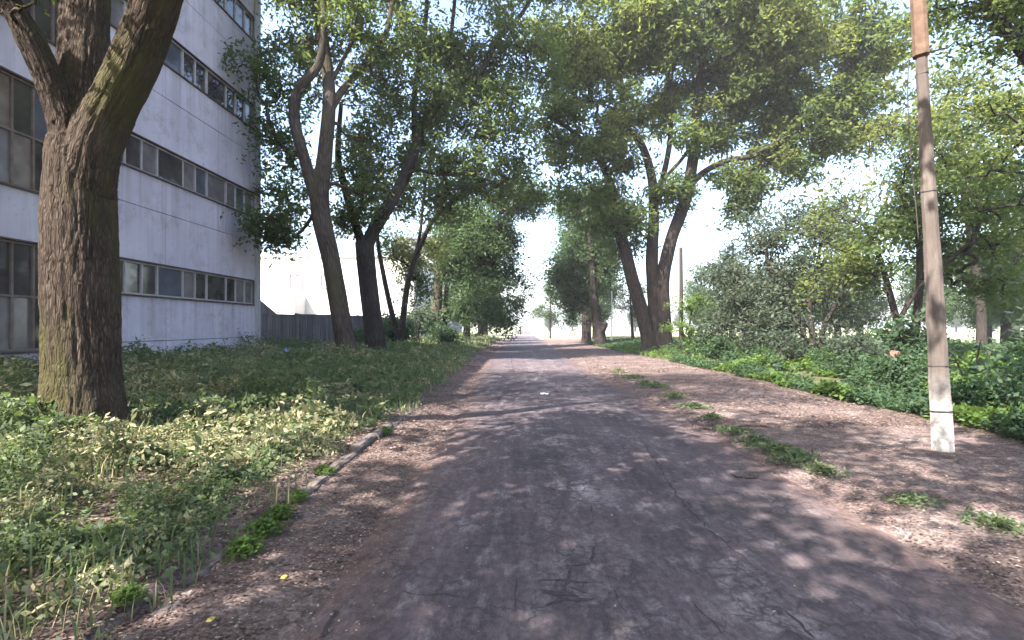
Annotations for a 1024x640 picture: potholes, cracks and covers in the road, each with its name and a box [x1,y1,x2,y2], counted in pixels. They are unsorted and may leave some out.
crack [539,547,627,614]
crack [691,597,726,638]
pothole [731,471,759,479]
crack [642,442,755,569]
crack [785,610,816,639]
